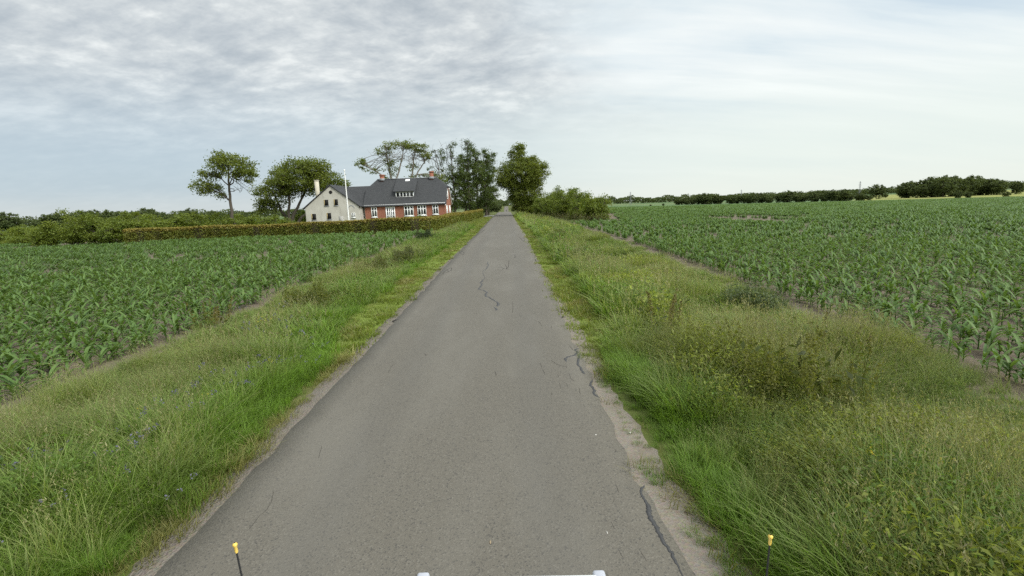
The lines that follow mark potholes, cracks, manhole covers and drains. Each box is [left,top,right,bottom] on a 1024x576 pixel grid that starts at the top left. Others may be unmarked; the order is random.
crack [475,262,520,316]
